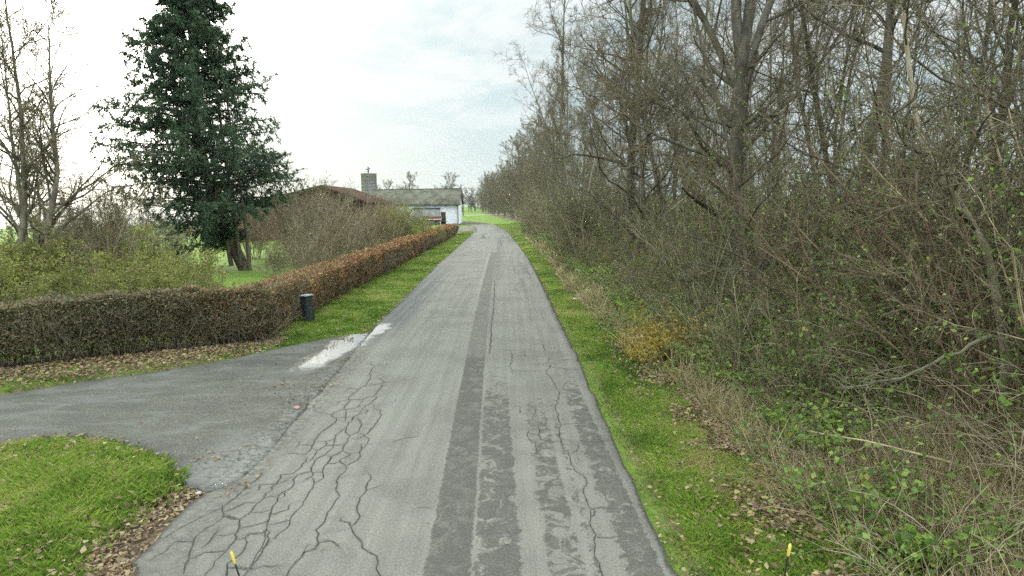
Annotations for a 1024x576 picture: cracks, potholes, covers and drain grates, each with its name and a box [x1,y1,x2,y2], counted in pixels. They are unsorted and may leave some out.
crack [148,363,416,576]
crack [506,345,621,576]
